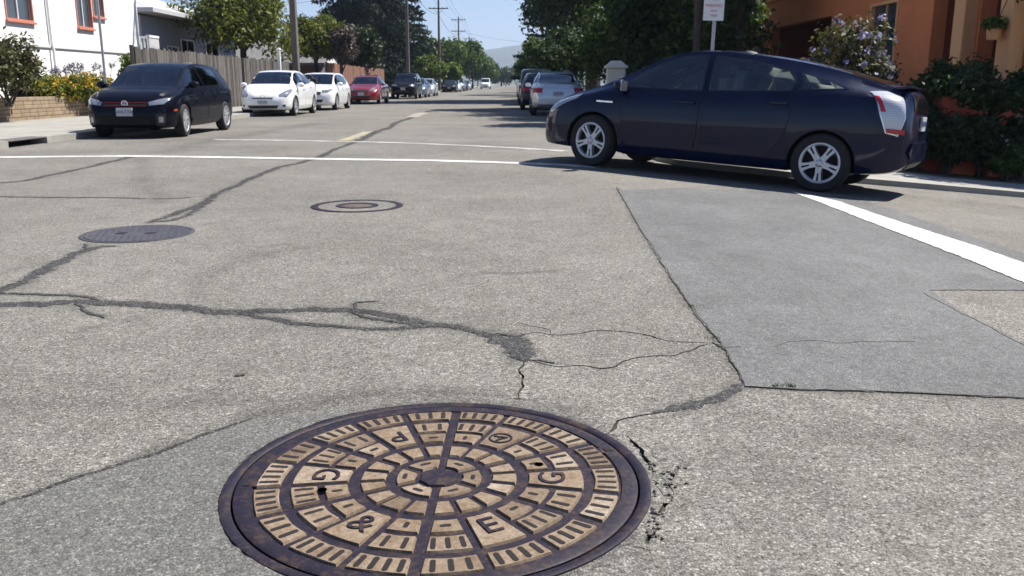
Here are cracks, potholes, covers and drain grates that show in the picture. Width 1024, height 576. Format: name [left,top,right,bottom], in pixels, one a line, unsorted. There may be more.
manhole cover [218,403,651,576]
manhole cover [78,225,195,243]
manhole cover [311,200,403,213]
crack [601,187,745,552]
